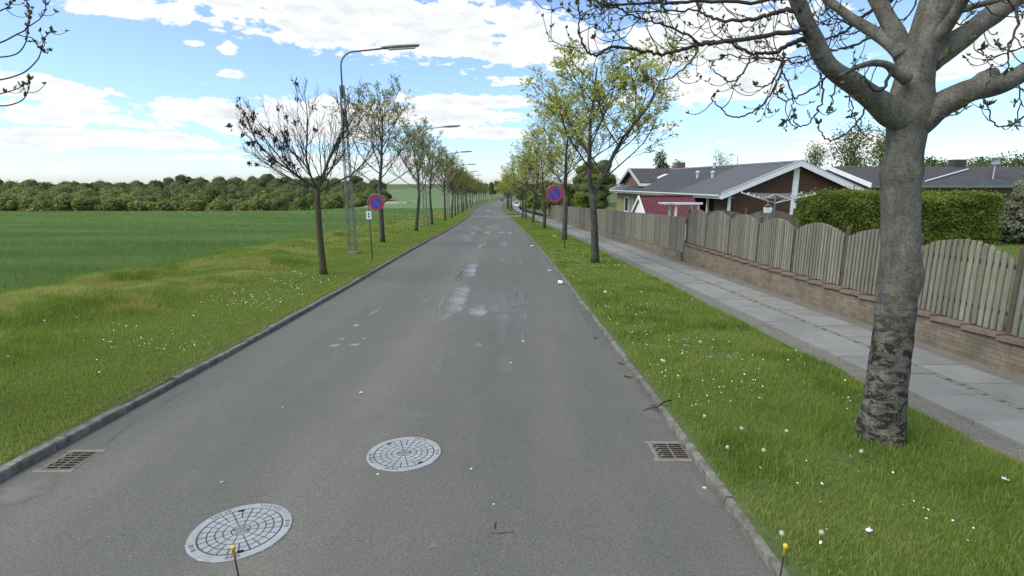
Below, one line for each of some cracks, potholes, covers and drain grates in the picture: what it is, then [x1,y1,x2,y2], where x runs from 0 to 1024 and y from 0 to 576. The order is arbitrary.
manhole cover [366,437,441,472]
drain grate [31,450,107,473]
manhole cover [185,503,293,563]
drain grate [644,441,693,461]
